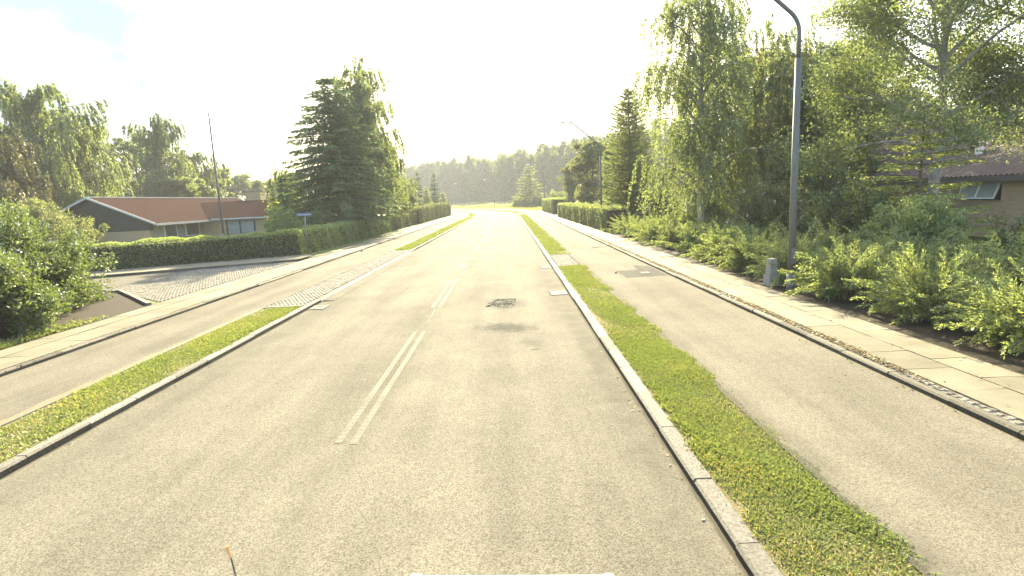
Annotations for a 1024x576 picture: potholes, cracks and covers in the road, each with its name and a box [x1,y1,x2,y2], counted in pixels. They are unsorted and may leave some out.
pothole [485,298,516,309]
